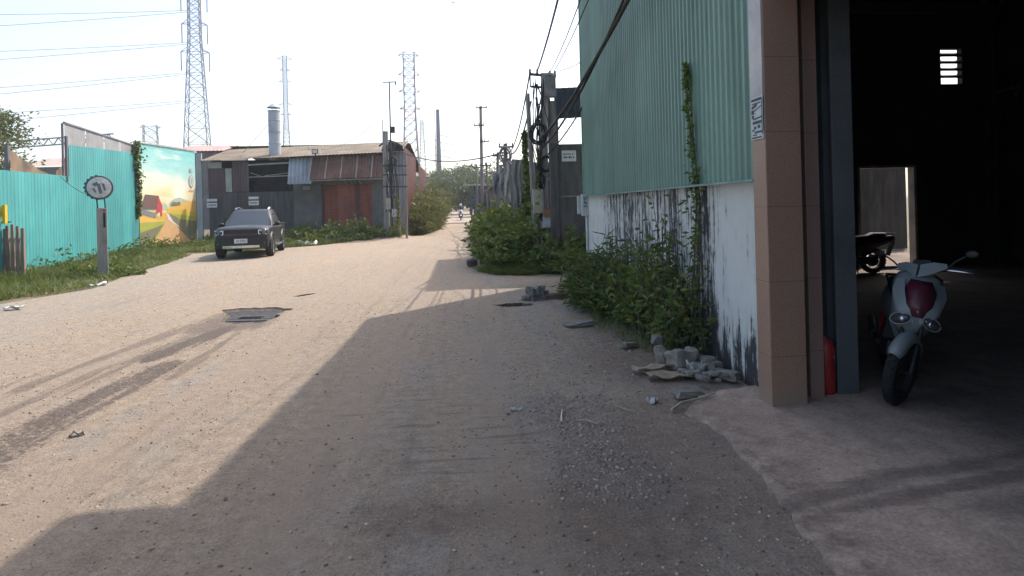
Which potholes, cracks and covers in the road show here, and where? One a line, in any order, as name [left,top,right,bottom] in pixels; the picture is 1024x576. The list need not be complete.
pothole [221,307,292,324]
